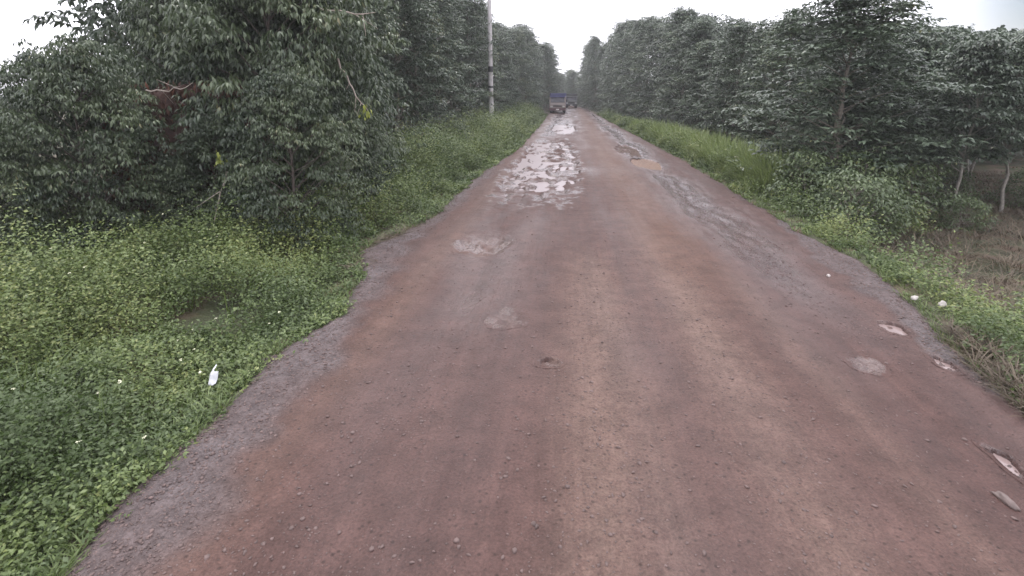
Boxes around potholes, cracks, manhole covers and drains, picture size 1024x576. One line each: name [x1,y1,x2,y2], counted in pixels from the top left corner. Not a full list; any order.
pothole [475,136,589,222]
pothole [482,306,531,331]
pothole [546,123,579,136]
pothole [836,353,893,377]
pothole [872,318,915,339]
pothole [628,156,665,172]
pothole [971,439,1024,485]
pothole [448,230,517,261]
pothole [531,355,567,369]
pothole [923,352,968,375]
pothole [612,144,645,159]
